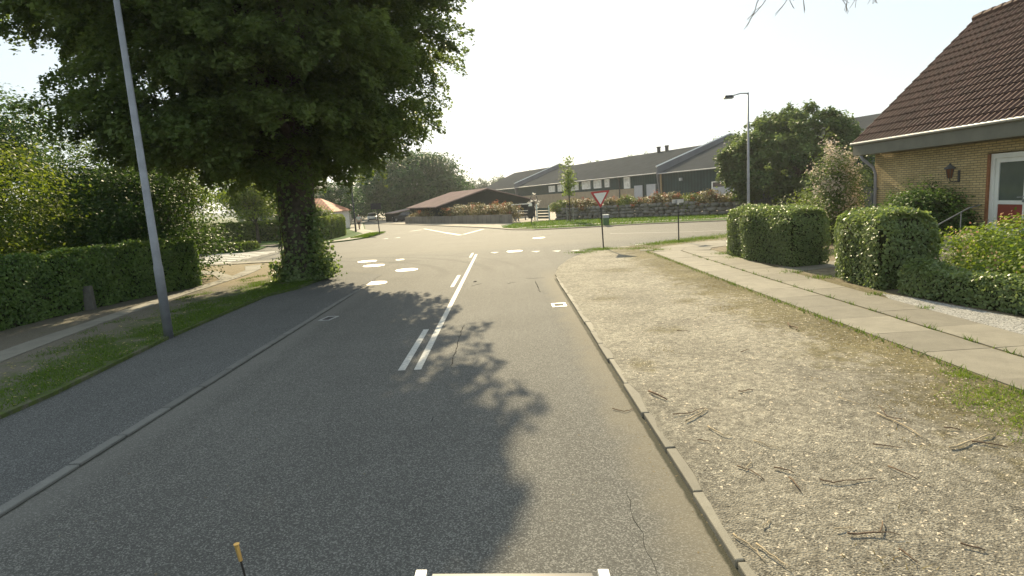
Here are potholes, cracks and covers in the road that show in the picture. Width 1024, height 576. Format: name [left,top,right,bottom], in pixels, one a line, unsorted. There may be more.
crack [627,495,658,576]
